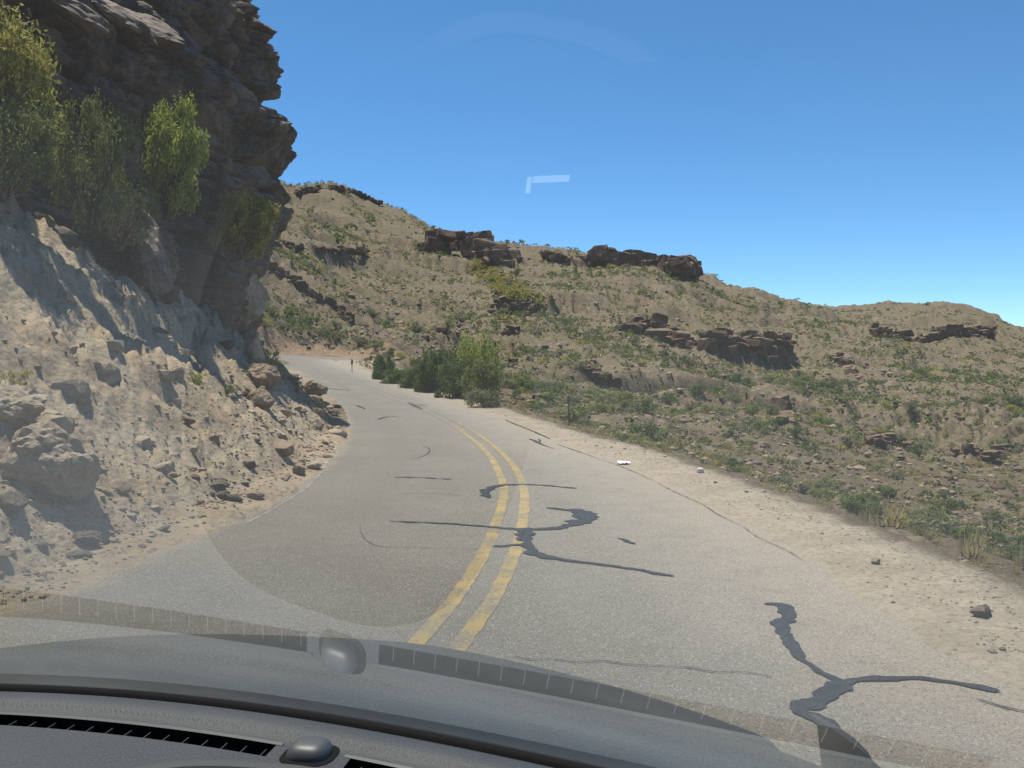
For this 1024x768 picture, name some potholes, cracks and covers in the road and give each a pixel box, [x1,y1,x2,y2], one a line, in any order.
crack [605,660,773,677]
crack [507,420,803,560]
